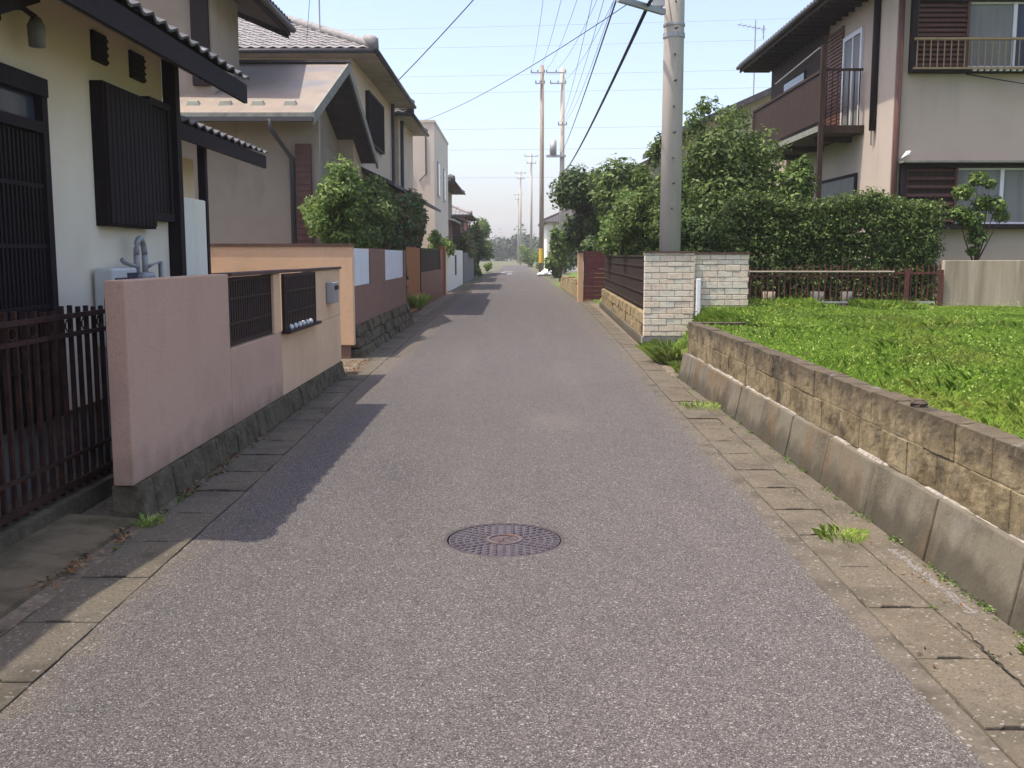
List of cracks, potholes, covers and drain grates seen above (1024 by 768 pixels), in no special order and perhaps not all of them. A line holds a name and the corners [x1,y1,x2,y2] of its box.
crack [957,622,1024,686]
manhole cover [444,523,565,557]
